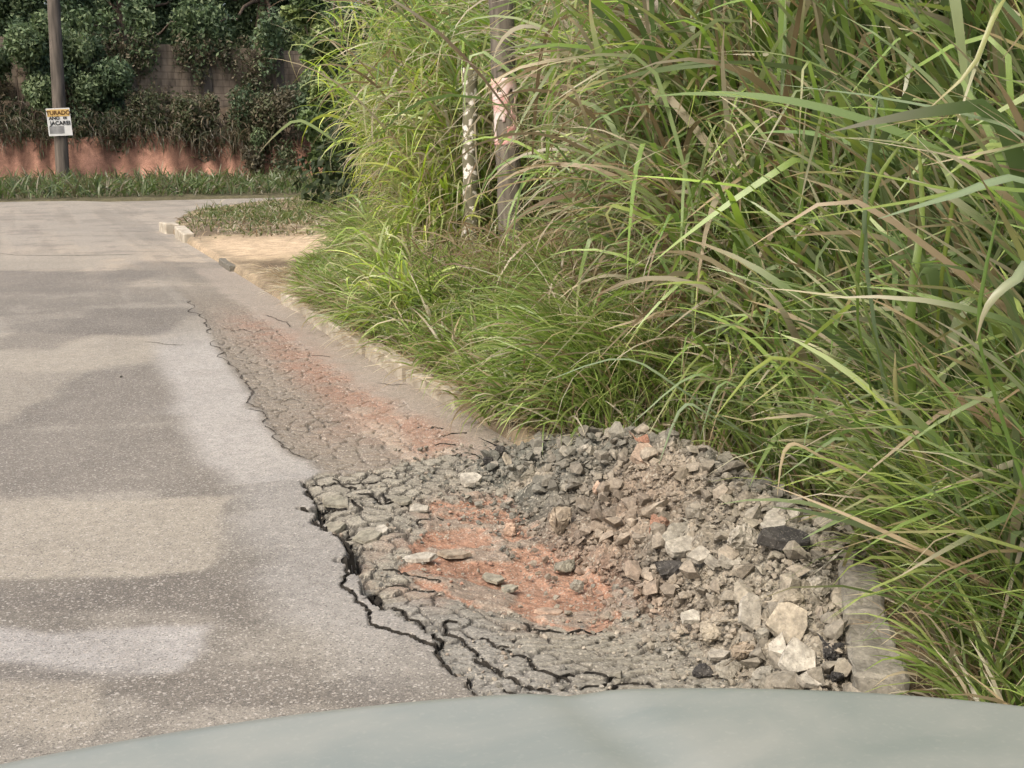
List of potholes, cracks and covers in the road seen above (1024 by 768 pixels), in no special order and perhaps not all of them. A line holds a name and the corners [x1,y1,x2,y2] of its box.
pothole [305,453,915,696]
crack [300,477,654,696]
crack [187,300,339,458]
